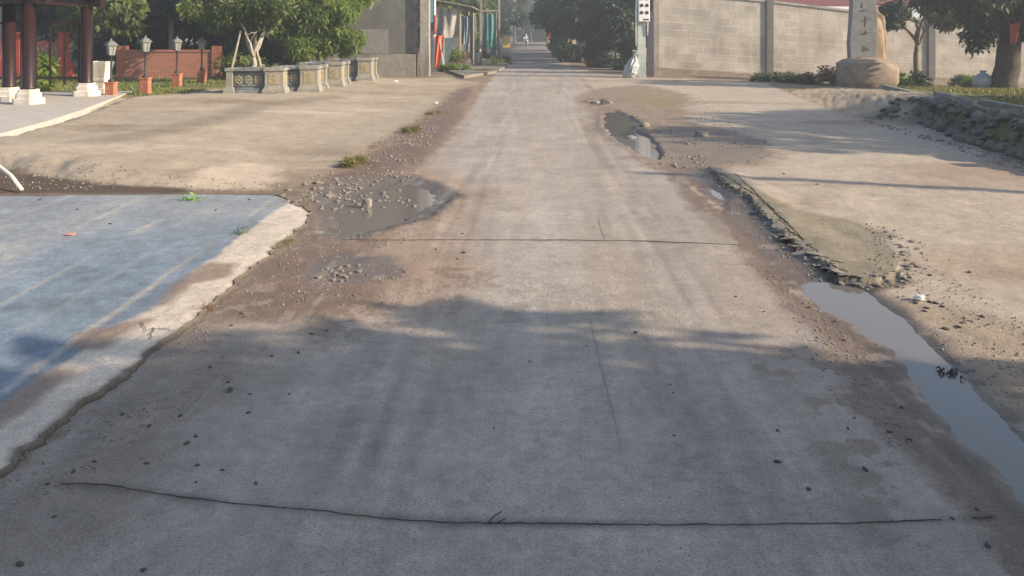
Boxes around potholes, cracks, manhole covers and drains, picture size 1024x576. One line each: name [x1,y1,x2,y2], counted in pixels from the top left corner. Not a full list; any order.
pothole [295,173,466,241]
pothole [672,167,1024,544]
pothole [594,110,670,161]
